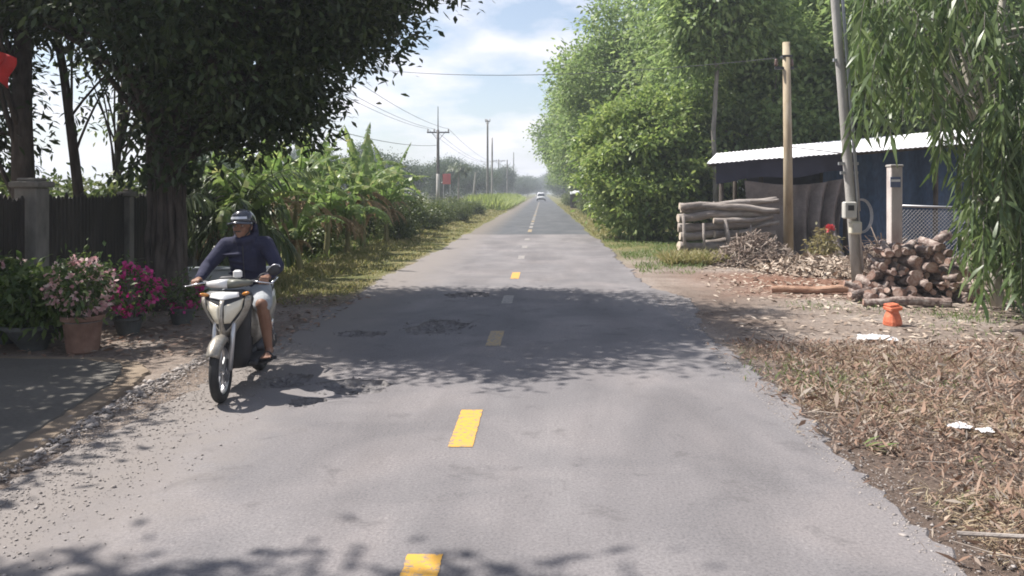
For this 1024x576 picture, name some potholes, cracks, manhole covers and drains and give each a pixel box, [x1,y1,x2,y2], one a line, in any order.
pothole [399,319,477,336]
pothole [334,329,387,338]
pothole [254,373,314,389]
pothole [304,376,395,396]
